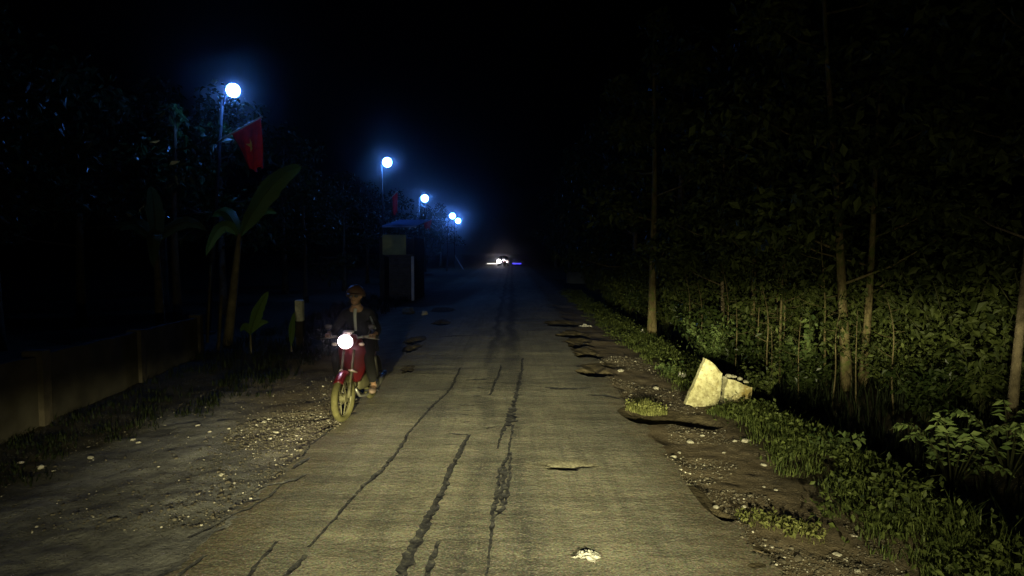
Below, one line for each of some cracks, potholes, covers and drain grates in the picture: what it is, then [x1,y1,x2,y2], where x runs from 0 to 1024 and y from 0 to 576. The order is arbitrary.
pothole [402,336,426,345]
pothole [570,347,604,359]
pothole [574,363,615,377]
pothole [555,330,591,339]
pothole [537,458,604,471]
pothole [401,344,423,353]
pothole [563,338,594,349]
crack [175,358,524,576]
